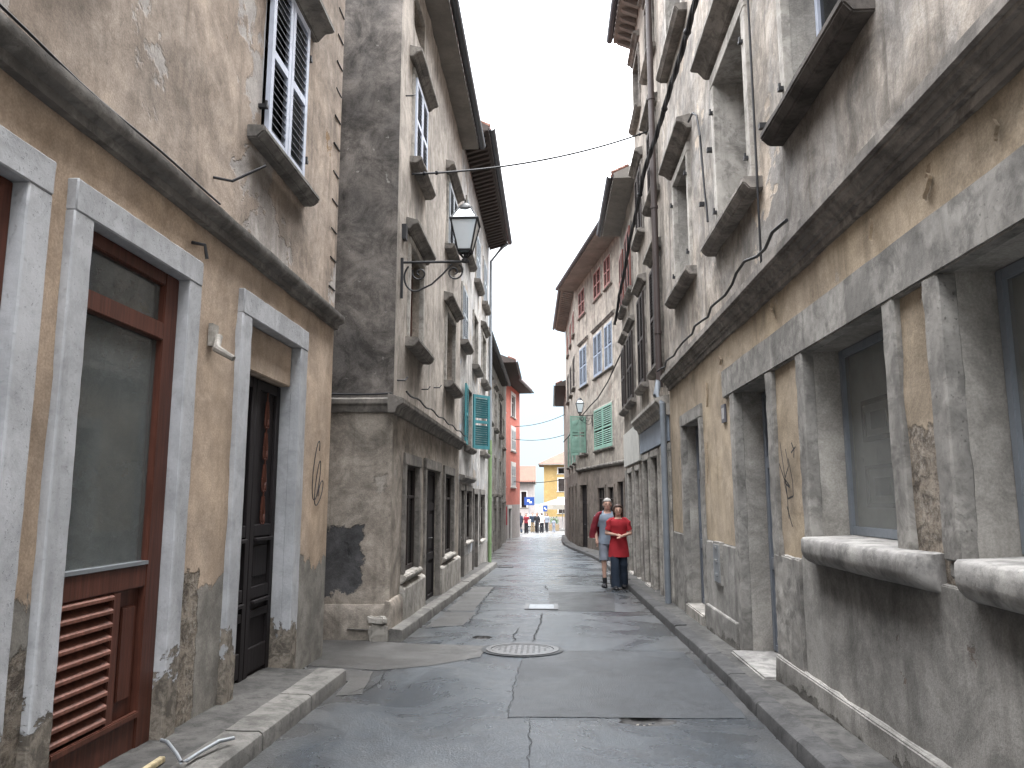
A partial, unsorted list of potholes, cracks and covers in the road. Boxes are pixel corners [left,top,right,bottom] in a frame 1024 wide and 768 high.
manhole cover [481,642,563,657]
